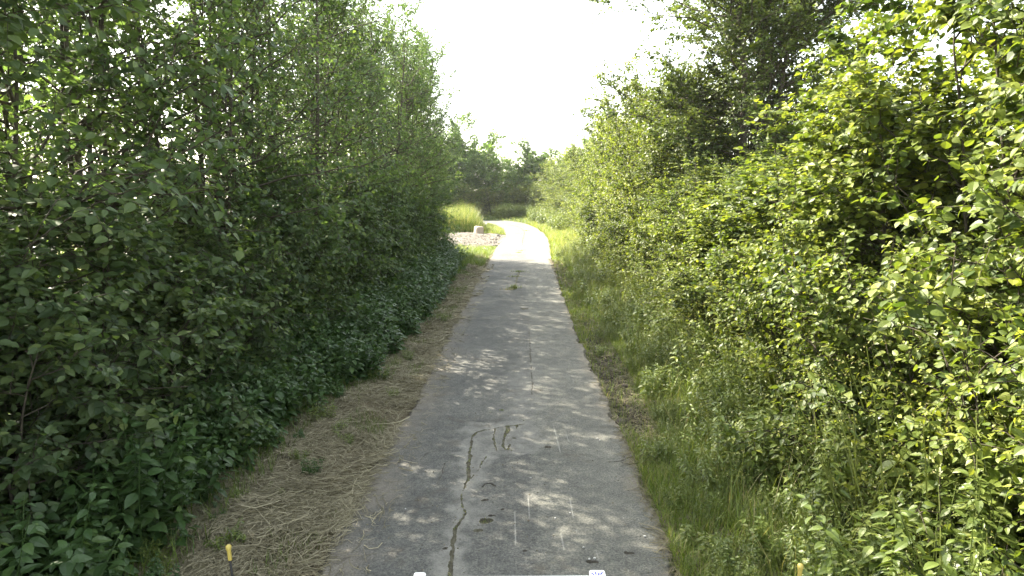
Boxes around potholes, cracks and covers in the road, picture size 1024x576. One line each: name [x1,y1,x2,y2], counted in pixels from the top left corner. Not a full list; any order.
pothole [476,517,497,526]
crack [419,423,526,576]
